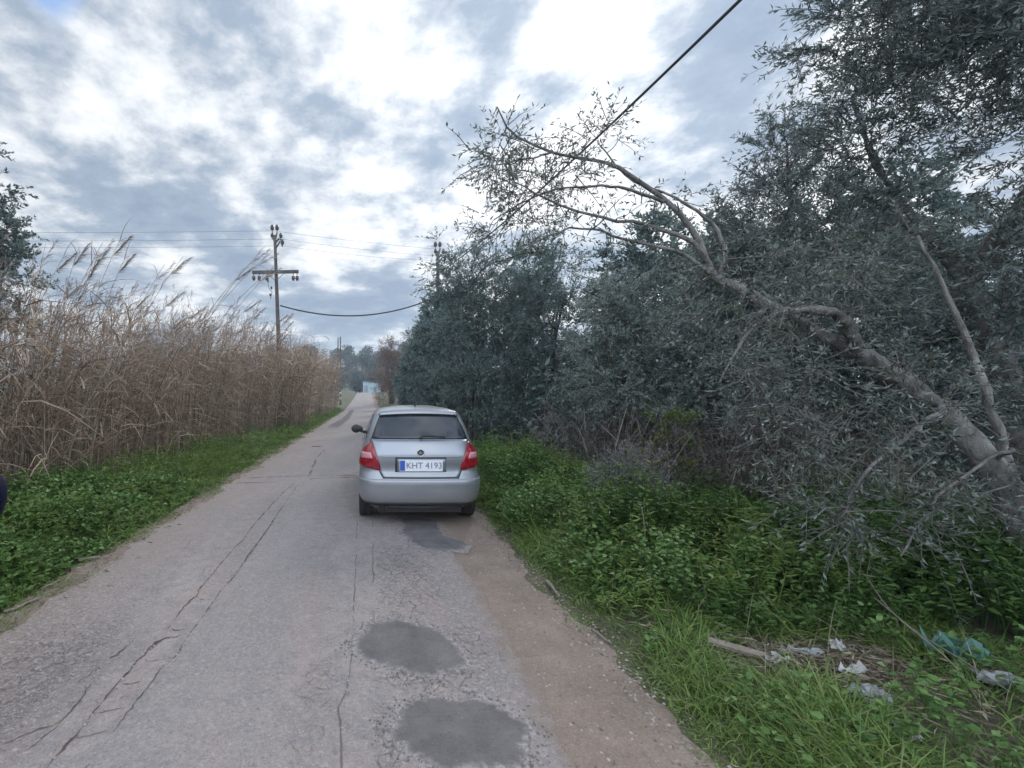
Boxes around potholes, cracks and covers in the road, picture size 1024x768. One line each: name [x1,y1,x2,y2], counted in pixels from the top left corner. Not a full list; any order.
crack [0,481,306,768]
